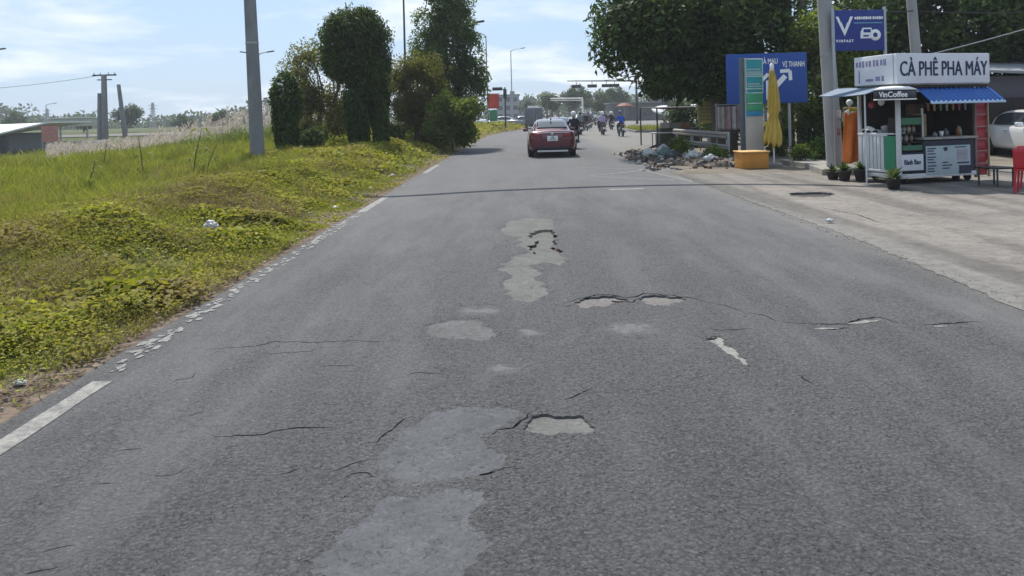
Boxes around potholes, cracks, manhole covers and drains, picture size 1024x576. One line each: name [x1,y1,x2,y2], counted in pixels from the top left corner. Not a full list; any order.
pothole [574,296,629,308]
crack [273,416,412,481]
pothole [639,295,686,307]
crack [697,312,980,340]
crack [565,293,742,311]
pothole [523,414,596,435]
crack [214,427,331,437]
crack [198,340,396,366]
pothole [706,335,751,369]
